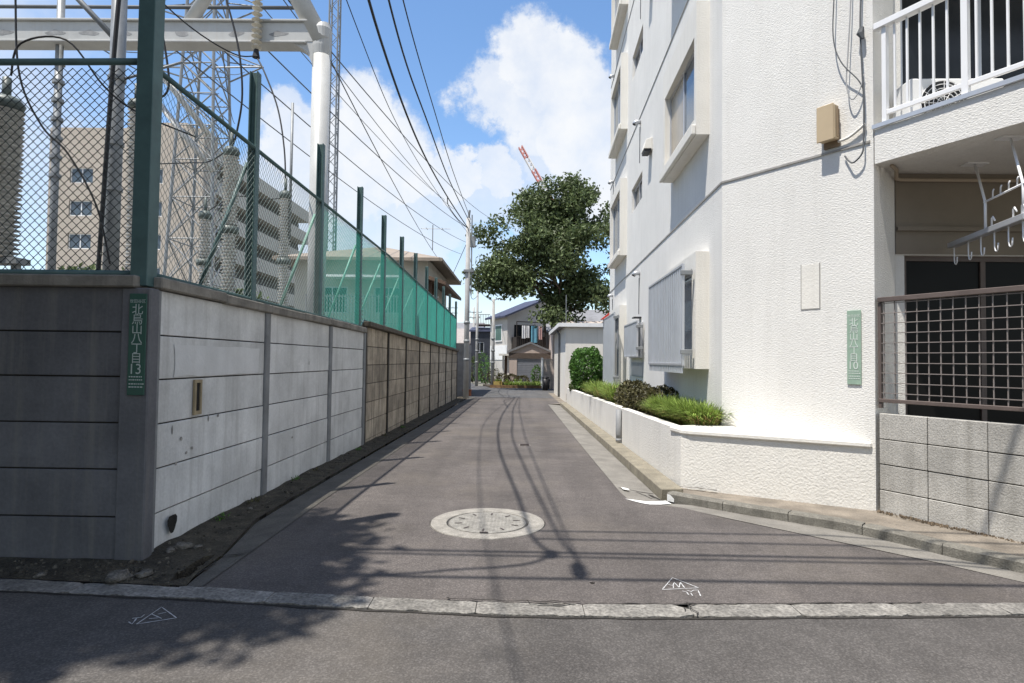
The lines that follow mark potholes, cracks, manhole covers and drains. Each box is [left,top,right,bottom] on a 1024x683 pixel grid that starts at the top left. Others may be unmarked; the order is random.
manhole cover [430,508,545,540]
